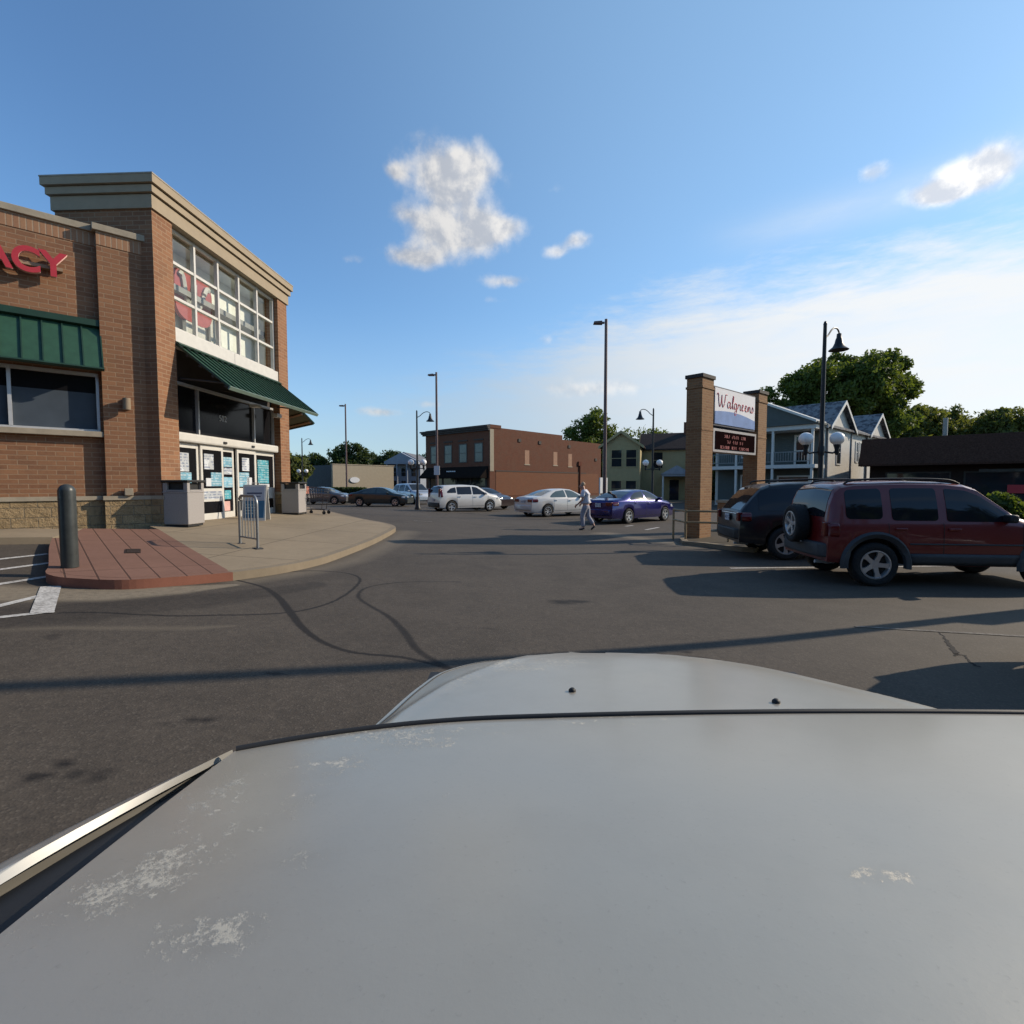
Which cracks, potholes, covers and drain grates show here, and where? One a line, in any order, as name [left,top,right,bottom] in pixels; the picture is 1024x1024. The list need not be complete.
crack [939,632,981,667]
